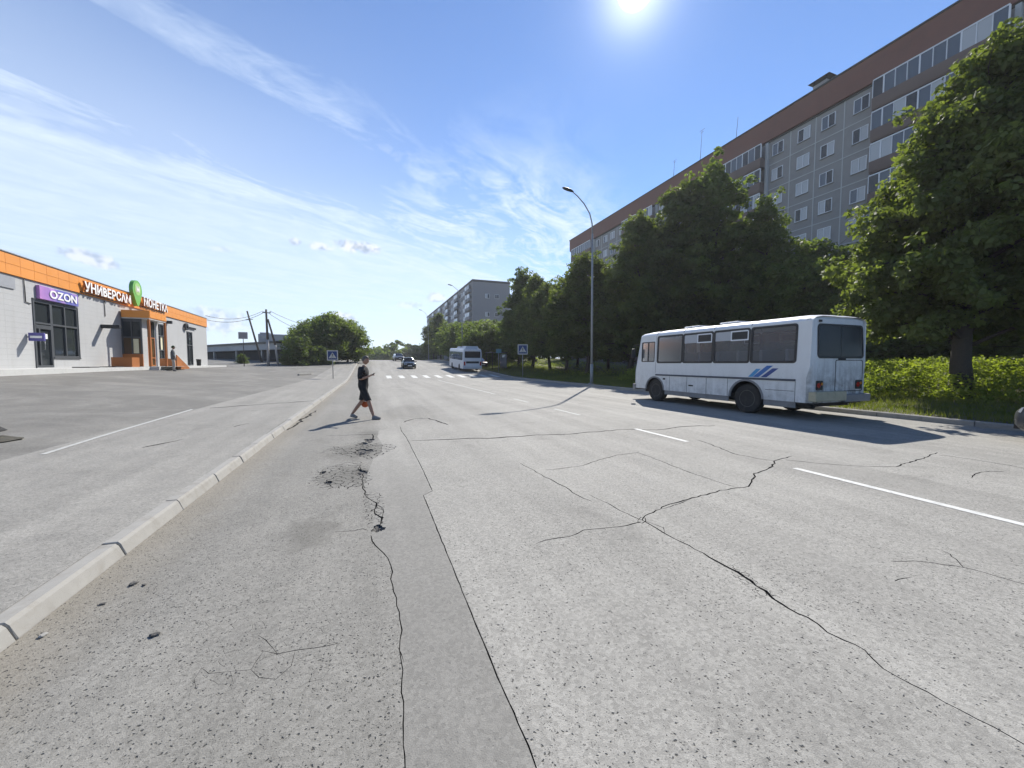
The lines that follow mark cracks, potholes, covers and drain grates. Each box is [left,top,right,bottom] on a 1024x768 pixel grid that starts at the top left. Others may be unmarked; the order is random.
crack [162,582,339,703]
crack [522,440,1024,744]
crack [309,434,406,768]
crack [405,418,700,441]
